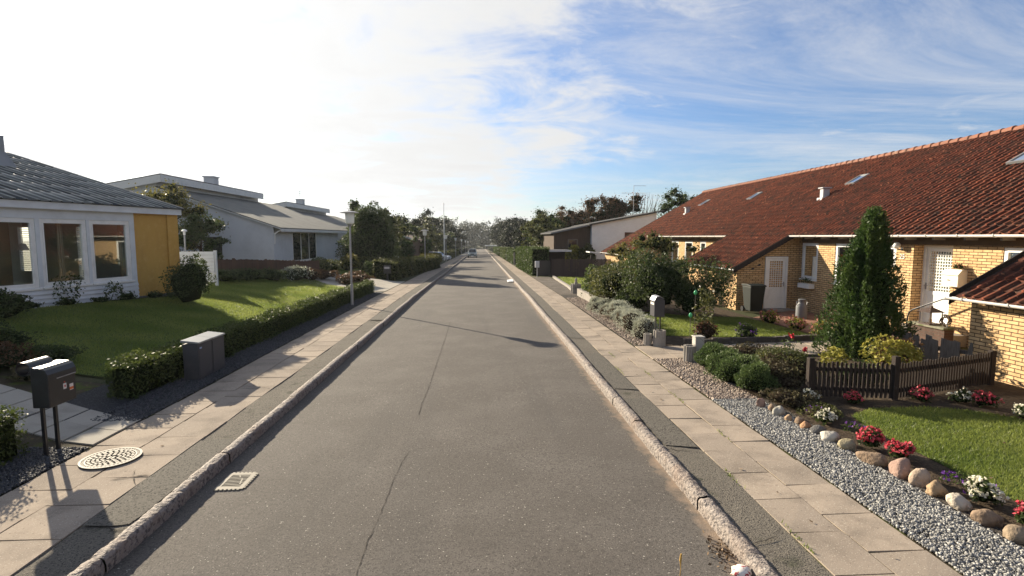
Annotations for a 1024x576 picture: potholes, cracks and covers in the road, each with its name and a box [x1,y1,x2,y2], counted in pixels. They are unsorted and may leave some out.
crack [356,447,579,575]
manhole cover [77,447,145,471]
drain grate [214,472,259,491]
